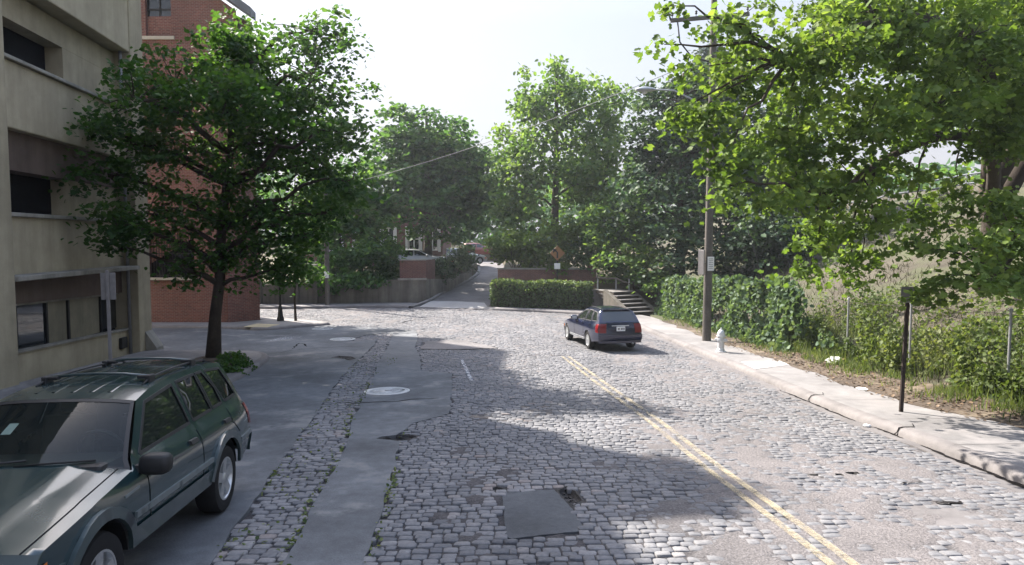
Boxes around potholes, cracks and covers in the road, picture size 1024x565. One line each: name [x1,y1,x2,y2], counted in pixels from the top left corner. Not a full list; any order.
pothole [555,485,586,511]
manhole cover [364,387,410,395]
pothole [378,434,420,442]
